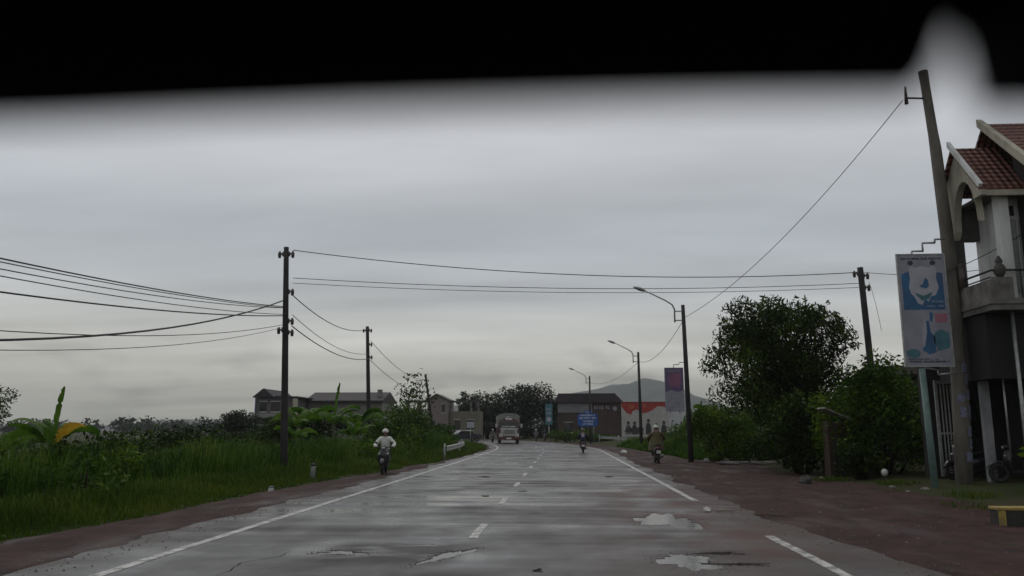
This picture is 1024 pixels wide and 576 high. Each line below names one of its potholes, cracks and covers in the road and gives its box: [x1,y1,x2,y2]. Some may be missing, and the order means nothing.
pothole [414,548,479,565]
pothole [655,553,725,571]
pothole [631,512,703,530]
